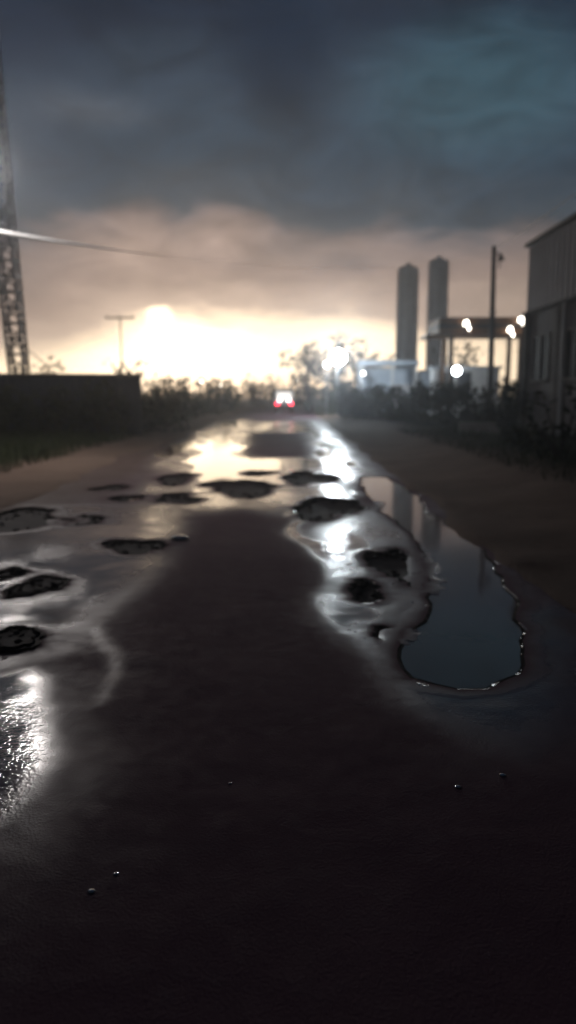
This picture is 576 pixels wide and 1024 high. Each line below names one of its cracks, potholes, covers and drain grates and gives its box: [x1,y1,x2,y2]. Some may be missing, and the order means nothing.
pothole [193,479,287,500]
pothole [350,476,553,700]
pothole [0,572,83,602]
pothole [334,575,396,607]
pothole [98,494,161,503]
pothole [0,506,90,535]
pothole [149,472,203,487]
pothole [89,537,181,558]
pothole [46,513,116,528]
pothole [279,495,387,524]
pothole [274,470,347,487]
pothole [142,492,211,505]
